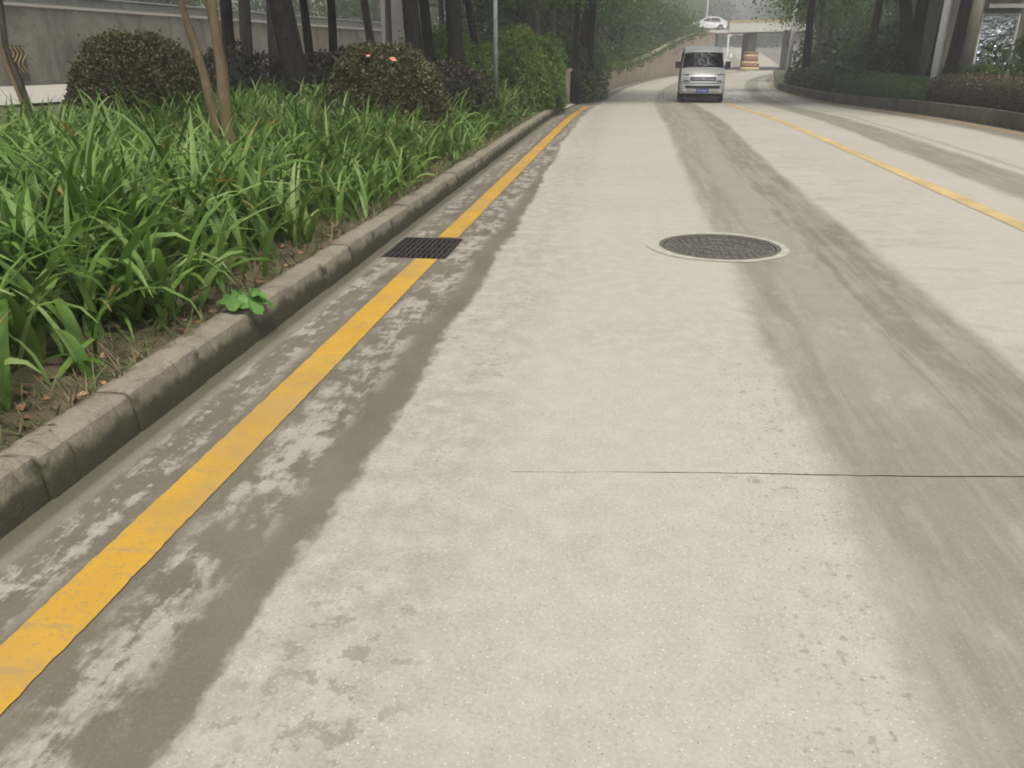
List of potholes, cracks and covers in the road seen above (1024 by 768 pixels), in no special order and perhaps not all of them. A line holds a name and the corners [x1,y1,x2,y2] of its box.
manhole cover [645,232,790,262]
drain grate [382,237,463,259]
